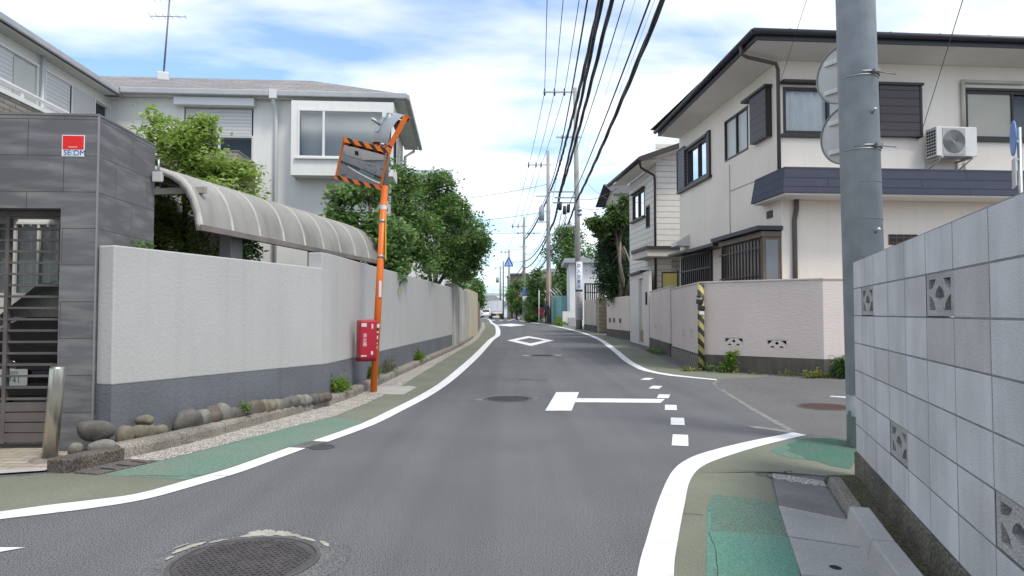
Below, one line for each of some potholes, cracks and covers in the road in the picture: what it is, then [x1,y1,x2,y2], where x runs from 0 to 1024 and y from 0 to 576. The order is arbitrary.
manhole cover [134,529,352,576]
manhole cover [475,395,543,403]
manhole cover [796,403,846,411]
